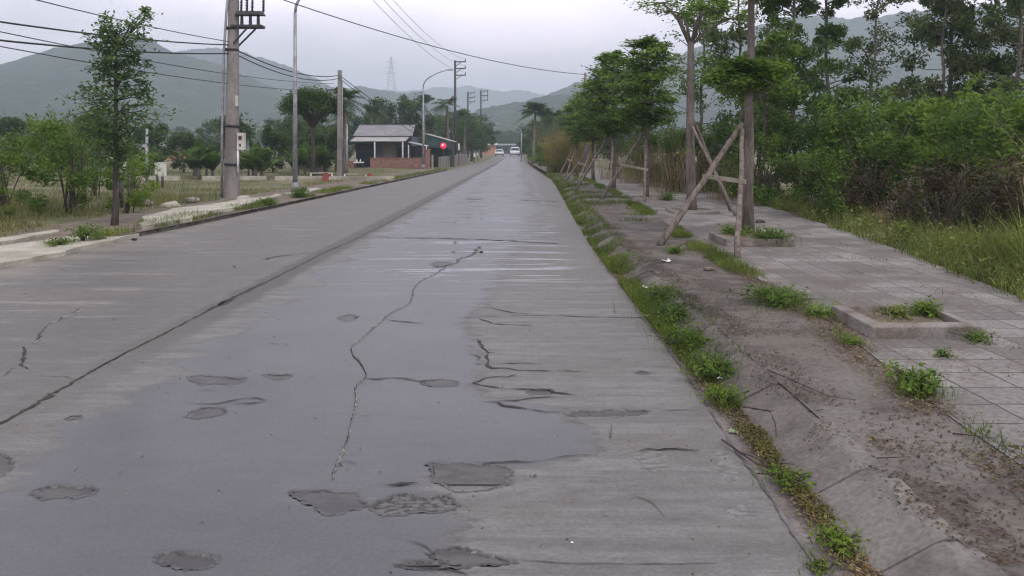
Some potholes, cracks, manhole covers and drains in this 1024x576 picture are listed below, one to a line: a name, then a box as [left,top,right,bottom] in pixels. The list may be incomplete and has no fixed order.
pothole [336,314,360,322]
pothole [562,408,650,418]
pothole [152,548,221,573]
pothole [425,546,519,566]
pothole [188,374,250,386]
pothole [183,407,227,419]
crack [18,308,83,380]
pothole [419,379,460,387]
crack [481,450,589,464]
crack [470,307,576,412]
pothole [287,488,370,516]
